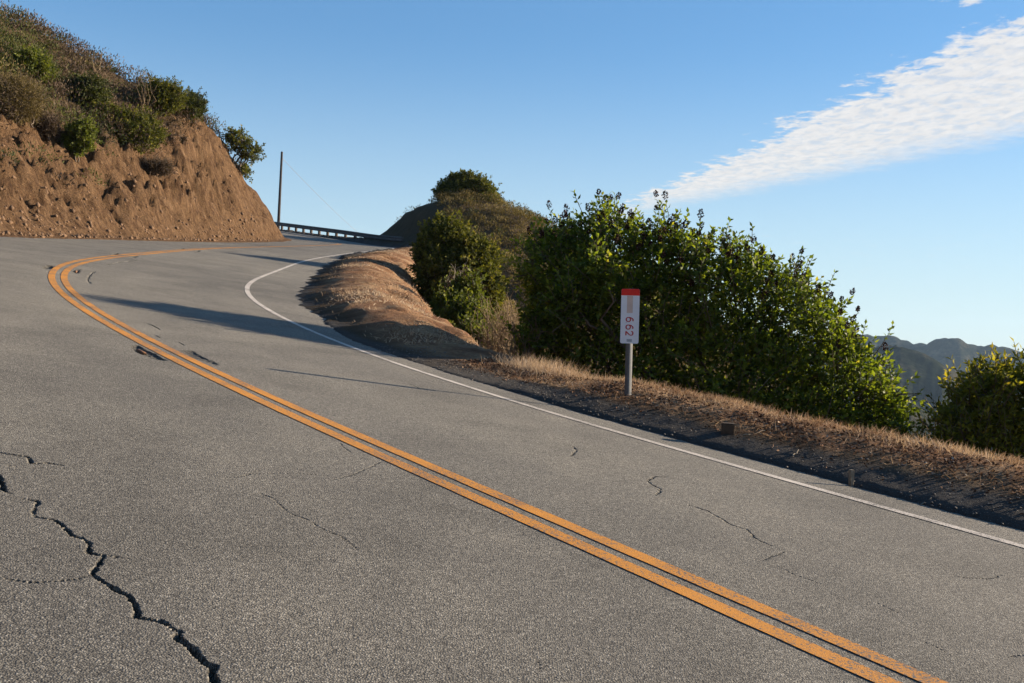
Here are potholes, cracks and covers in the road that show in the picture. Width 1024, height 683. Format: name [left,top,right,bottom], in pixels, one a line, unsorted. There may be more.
crack [260,493,358,550]
crack [0,452,221,683]
crack [689,505,817,583]
pothole [130,345,169,361]
pothole [181,350,220,366]
